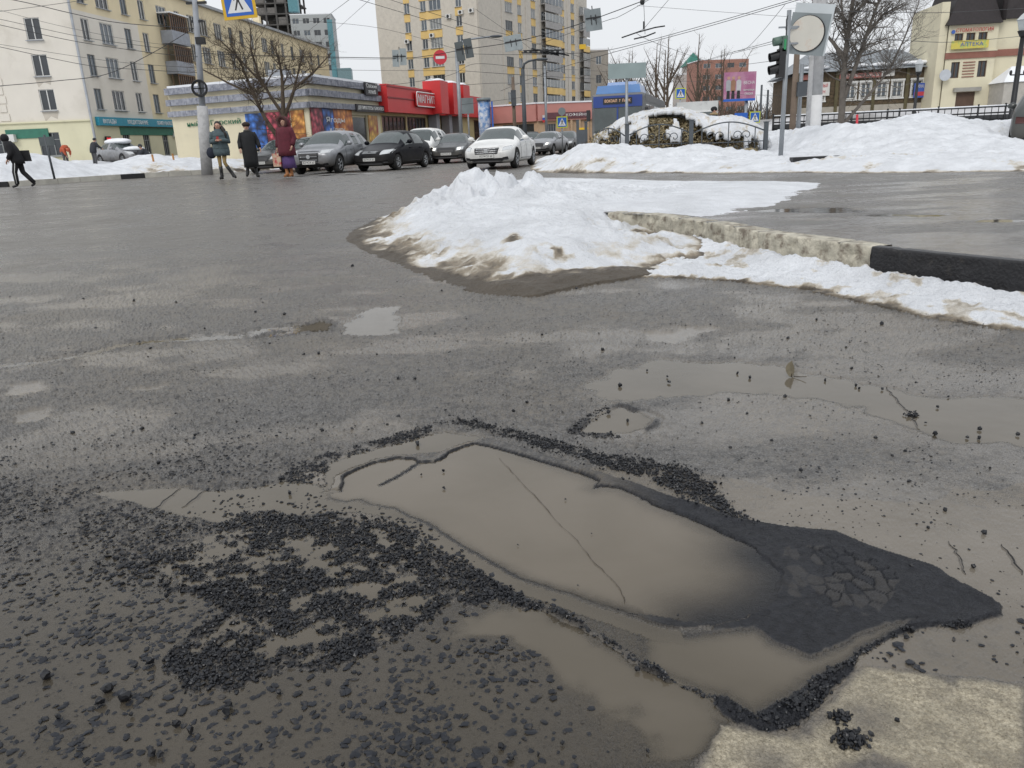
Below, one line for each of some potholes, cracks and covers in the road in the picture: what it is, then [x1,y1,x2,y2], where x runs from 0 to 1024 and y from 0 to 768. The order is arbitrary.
crack [1001,544,1023,575]
crack [948,542,966,575]
pothole [331,441,785,626]
crack [885,387,920,430]
